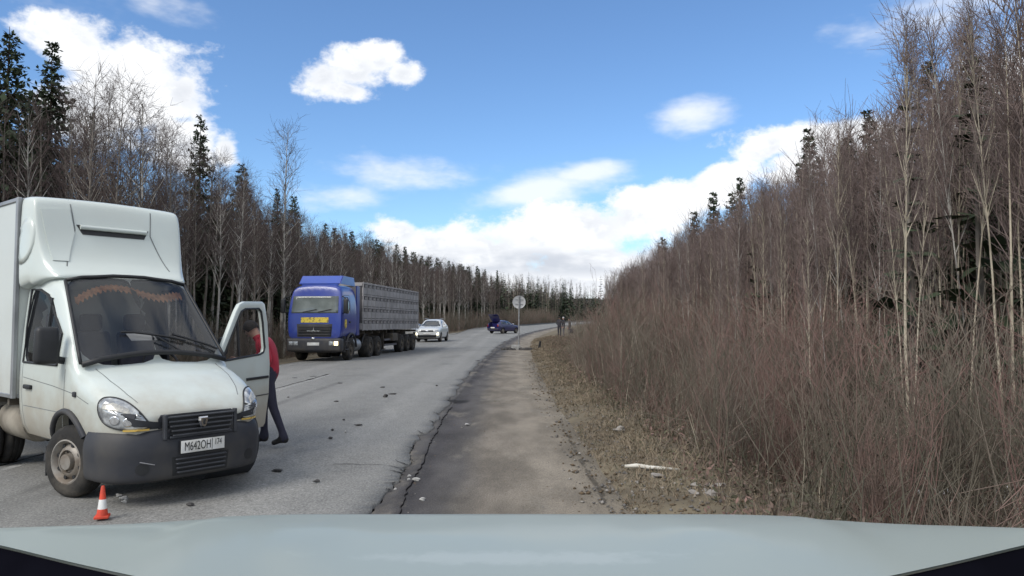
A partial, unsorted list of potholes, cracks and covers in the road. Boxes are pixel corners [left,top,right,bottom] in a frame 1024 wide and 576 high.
crack [372,372,470,514]
